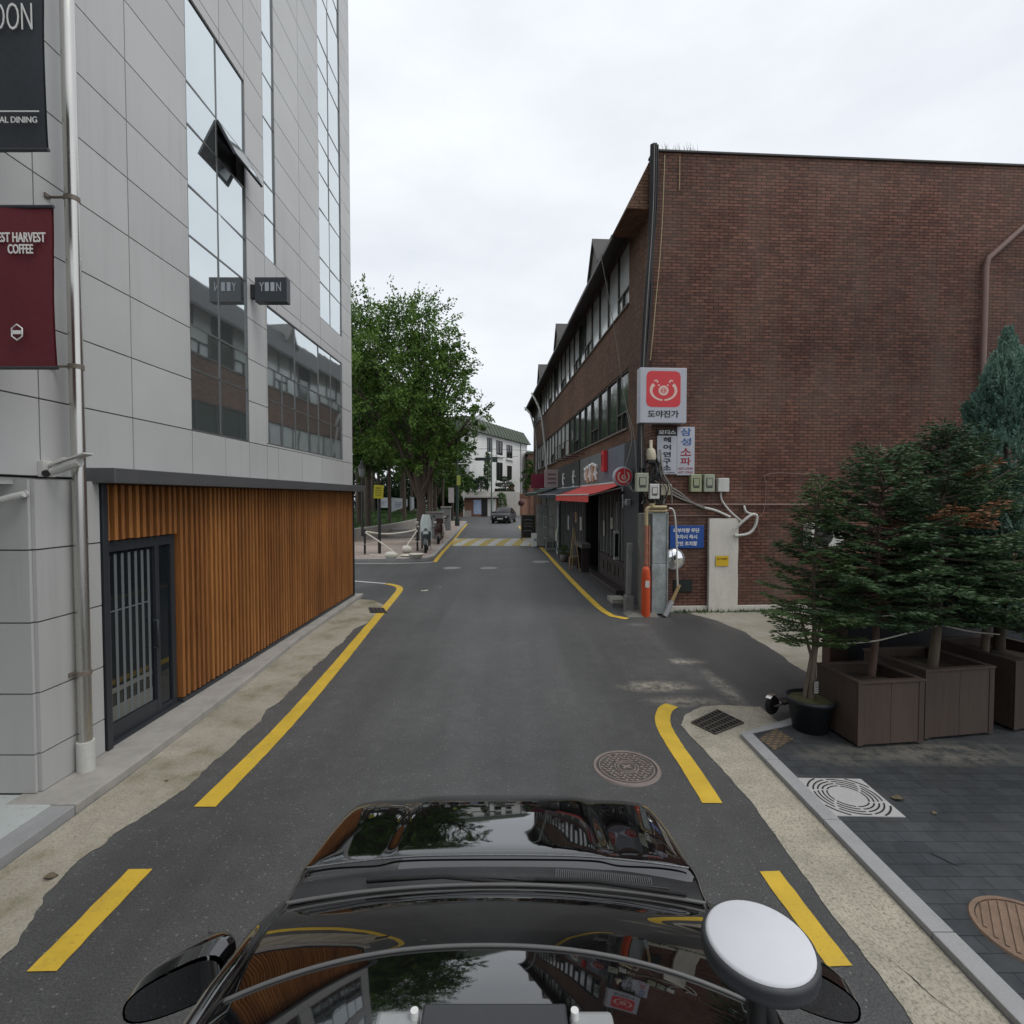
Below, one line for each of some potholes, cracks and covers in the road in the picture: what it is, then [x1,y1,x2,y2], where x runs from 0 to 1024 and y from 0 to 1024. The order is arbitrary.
manhole cover [967,895,1024,963]
manhole cover [592,750,661,787]
drain grate [691,709,744,735]
